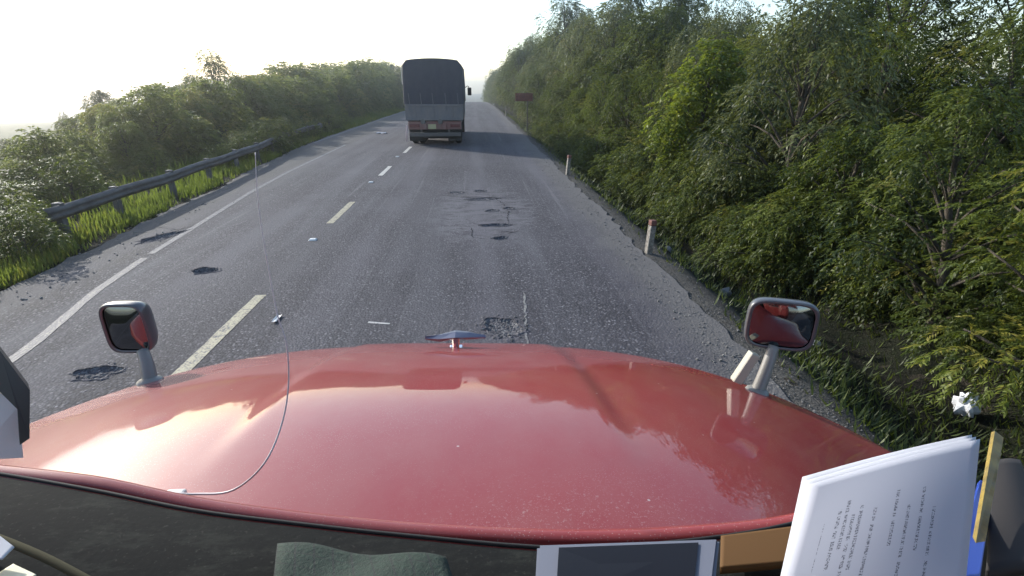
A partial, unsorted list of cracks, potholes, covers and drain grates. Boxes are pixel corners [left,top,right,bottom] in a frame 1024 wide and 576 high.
pothole [135,229,191,245]
pothole [189,266,223,275]
pothole [476,314,529,343]
pothole [67,362,127,382]
